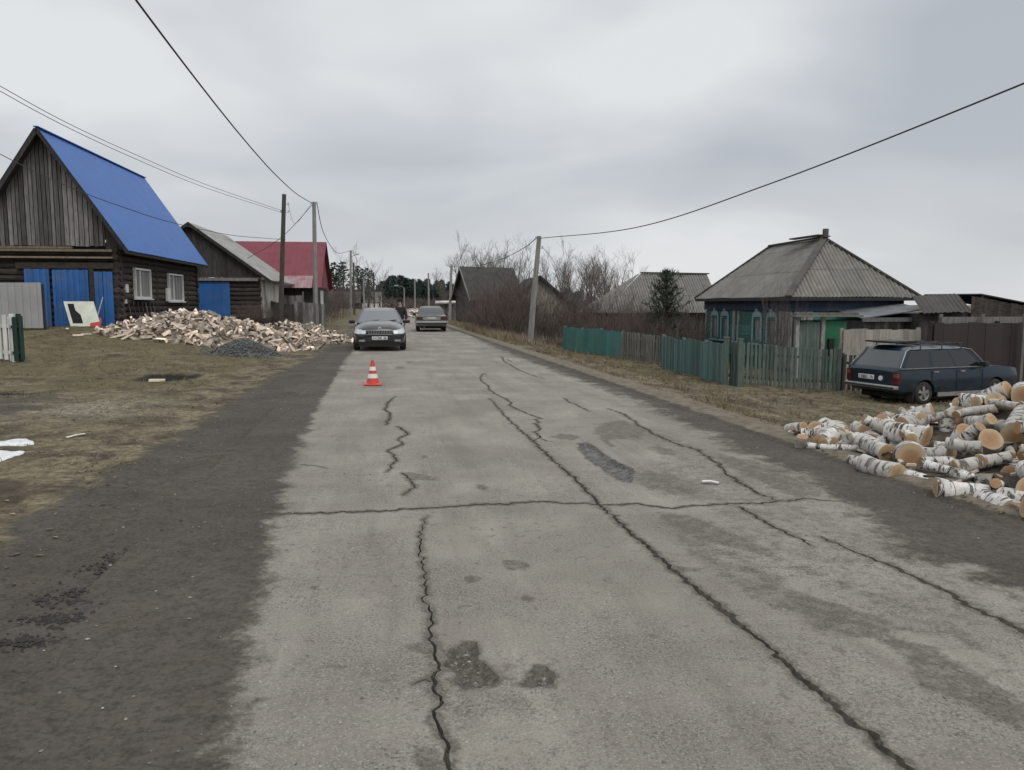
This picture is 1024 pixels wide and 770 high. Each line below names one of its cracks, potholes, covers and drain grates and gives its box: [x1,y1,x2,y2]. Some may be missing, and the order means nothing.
crack [265,373,1024,770]
